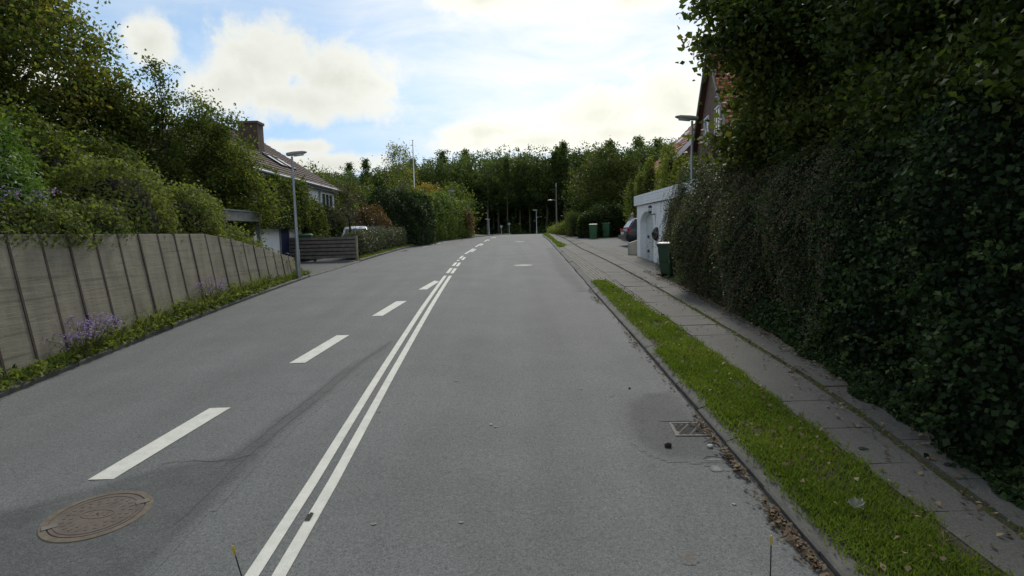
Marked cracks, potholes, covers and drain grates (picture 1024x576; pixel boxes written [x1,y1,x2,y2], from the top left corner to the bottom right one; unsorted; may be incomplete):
manhole cover [37,490,154,543]
drain grate [669,422,709,436]
